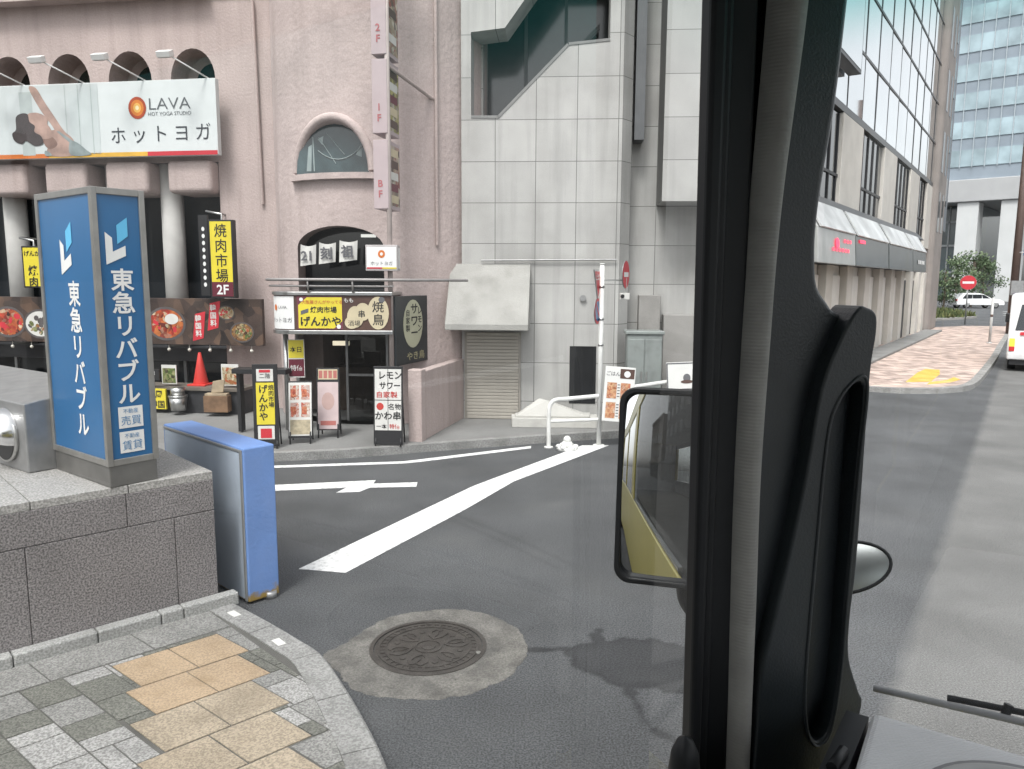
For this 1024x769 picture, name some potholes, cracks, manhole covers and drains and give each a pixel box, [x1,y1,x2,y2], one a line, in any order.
manhole cover [323,609,528,700]
